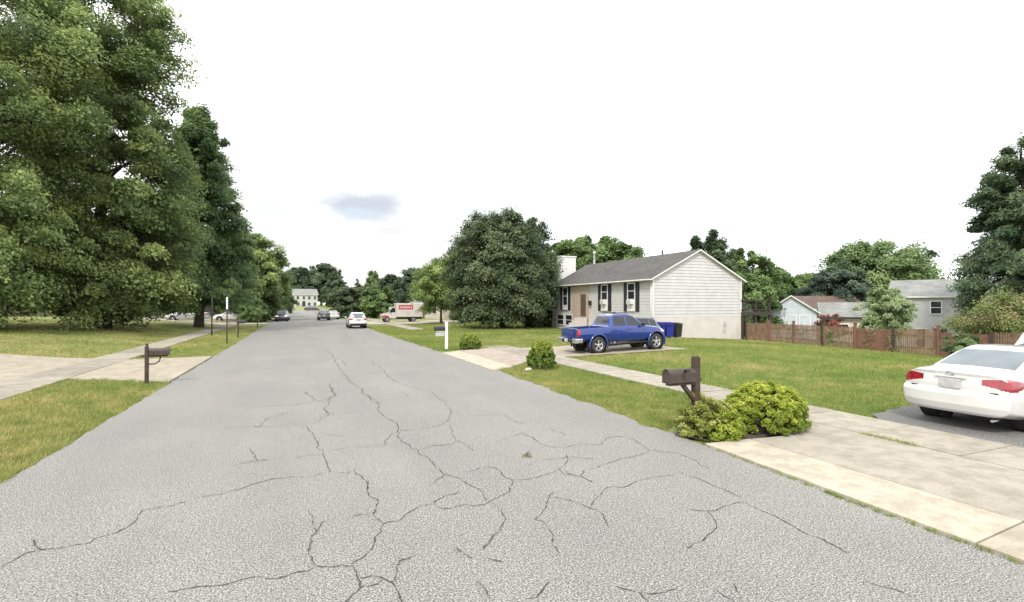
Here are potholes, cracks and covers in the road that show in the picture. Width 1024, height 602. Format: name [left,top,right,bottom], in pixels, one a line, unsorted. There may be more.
crack [0,472,327,567]
crack [681,472,847,553]
crack [168,331,708,602]
